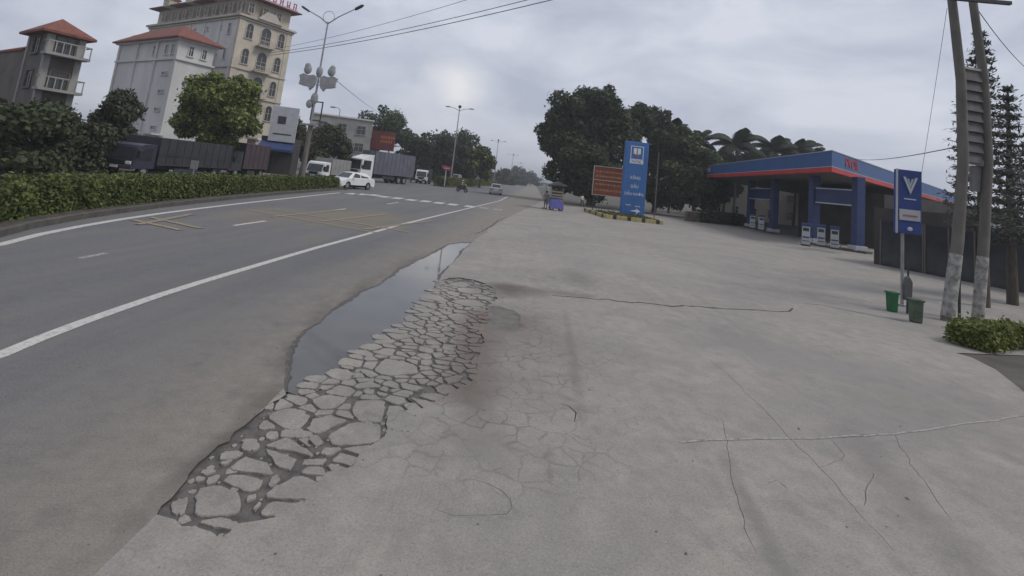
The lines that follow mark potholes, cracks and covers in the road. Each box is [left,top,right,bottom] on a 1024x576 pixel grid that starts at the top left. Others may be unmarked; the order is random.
crack [709,359,889,545]
crack [157,278,512,539]
crack [553,295,899,321]
